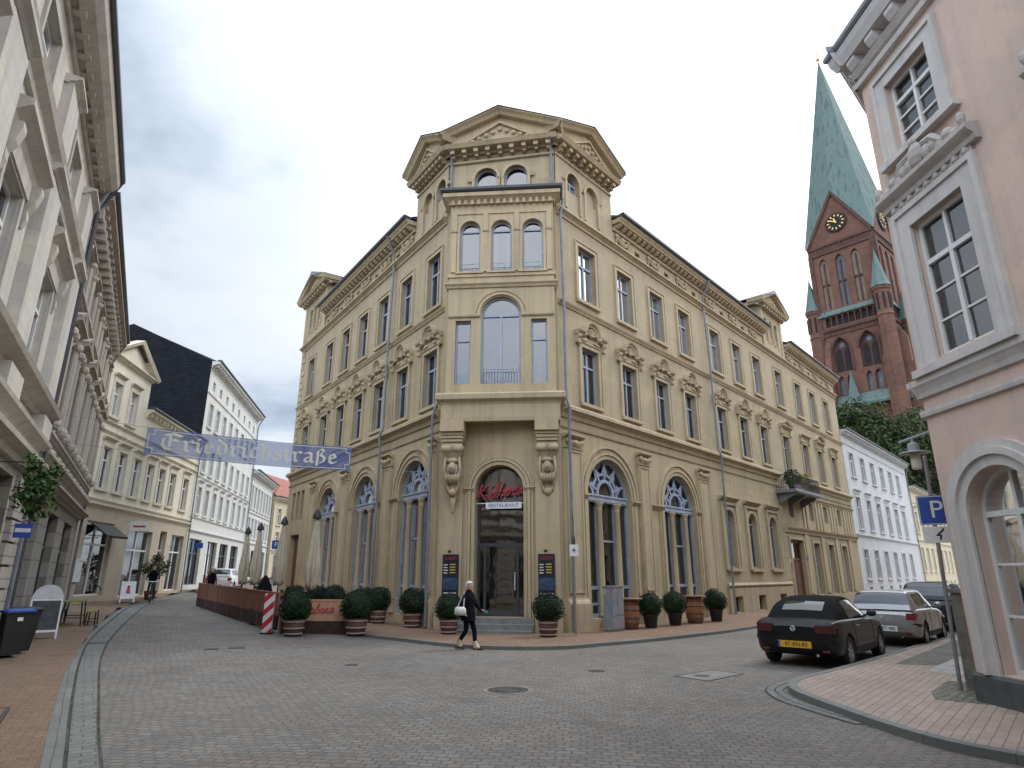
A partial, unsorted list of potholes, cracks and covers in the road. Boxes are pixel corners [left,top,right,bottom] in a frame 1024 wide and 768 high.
manhole cover [483,686,533,695]
manhole cover [674,670,744,681]
